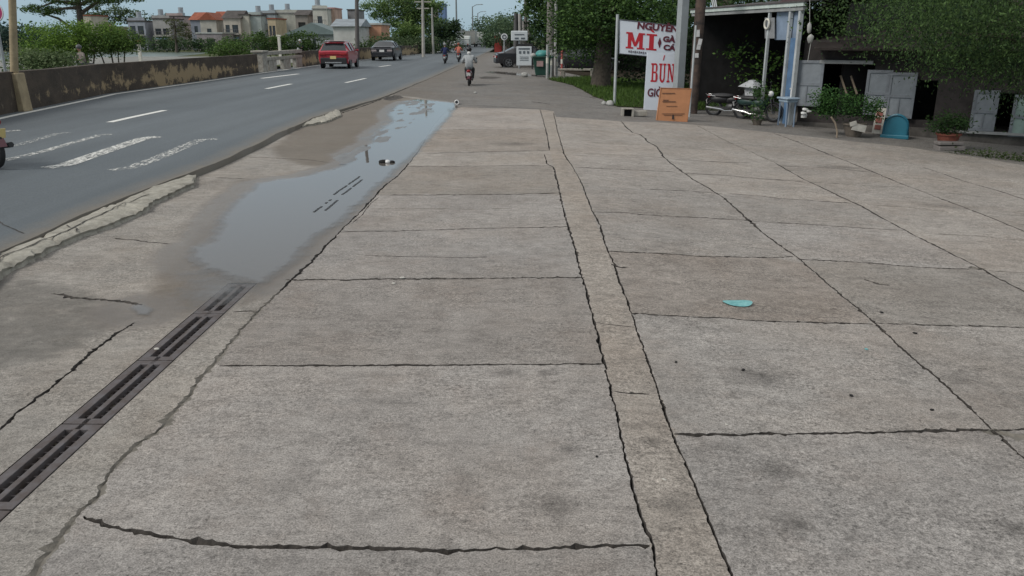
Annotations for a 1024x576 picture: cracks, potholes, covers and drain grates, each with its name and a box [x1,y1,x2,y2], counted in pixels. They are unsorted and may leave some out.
drain grate [0,424,104,512]
crack [0,322,135,430]
drain grate [194,284,255,315]
crack [53,293,142,305]
drain grate [138,314,223,362]
drain grate [63,361,172,425]
